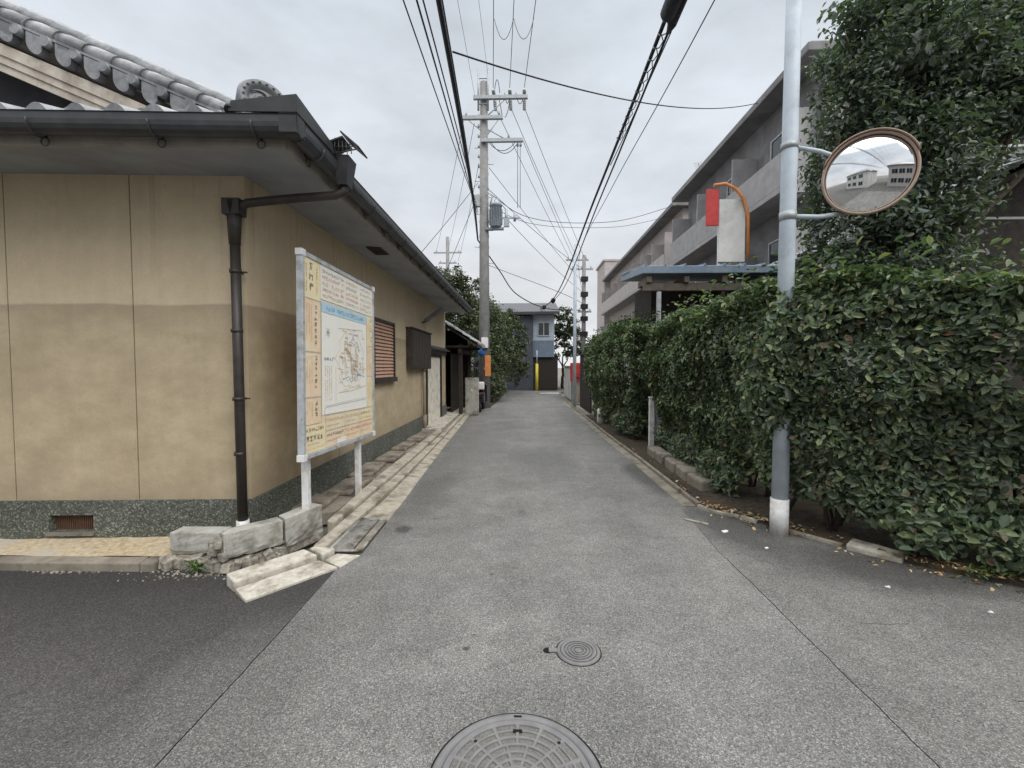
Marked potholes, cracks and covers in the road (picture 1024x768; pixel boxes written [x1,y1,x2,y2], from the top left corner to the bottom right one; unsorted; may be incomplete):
drain grate [329,518,387,555]
manhole cover [543,637,602,667]
manhole cover [430,713,602,768]
